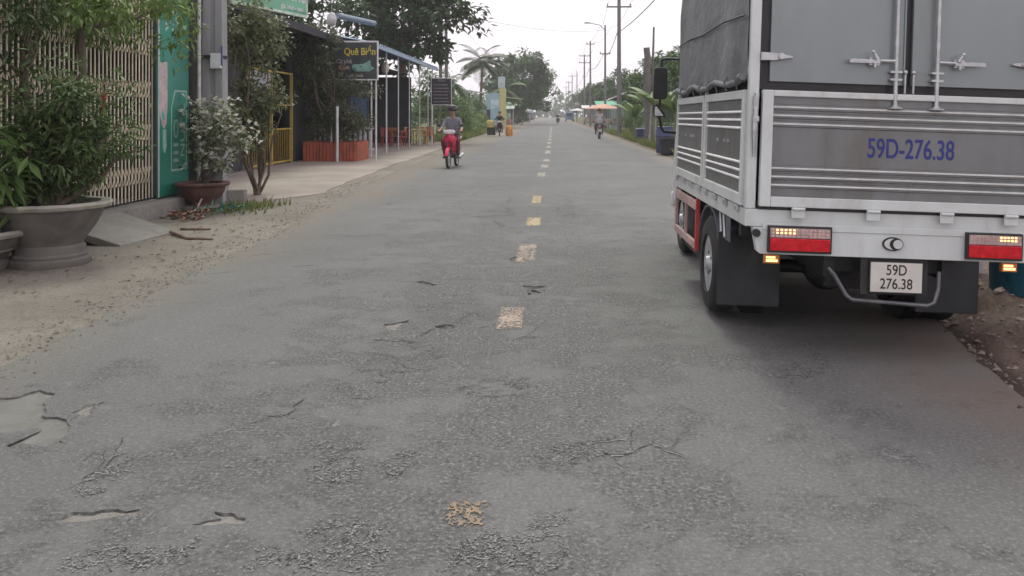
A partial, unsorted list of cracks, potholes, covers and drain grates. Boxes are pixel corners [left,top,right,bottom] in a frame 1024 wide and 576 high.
pothole [0,390,71,447]
crack [529,427,690,468]
crack [69,436,139,497]
crack [245,396,306,425]
pothole [70,403,97,417]
pothole [384,320,409,330]
pothole [523,285,546,295]
pothole [59,509,140,522]
pothole [193,511,246,526]
